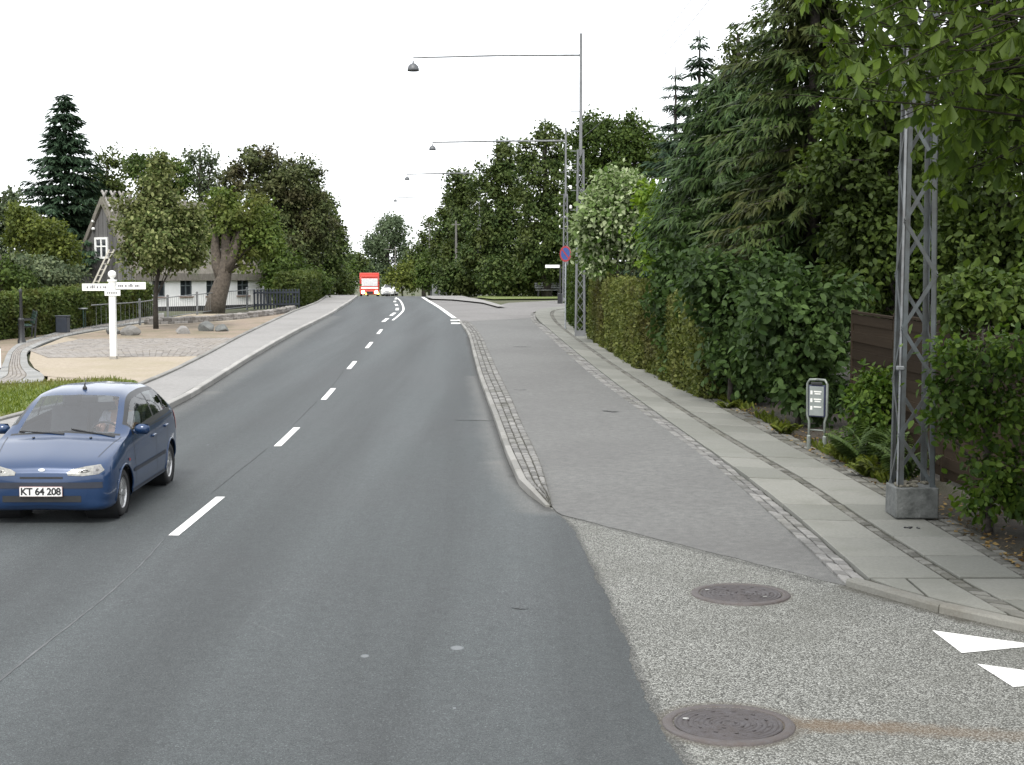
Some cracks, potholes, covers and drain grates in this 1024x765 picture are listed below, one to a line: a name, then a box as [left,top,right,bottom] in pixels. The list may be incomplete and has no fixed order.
manhole cover [691,583,791,606]
manhole cover [662,704,796,746]
